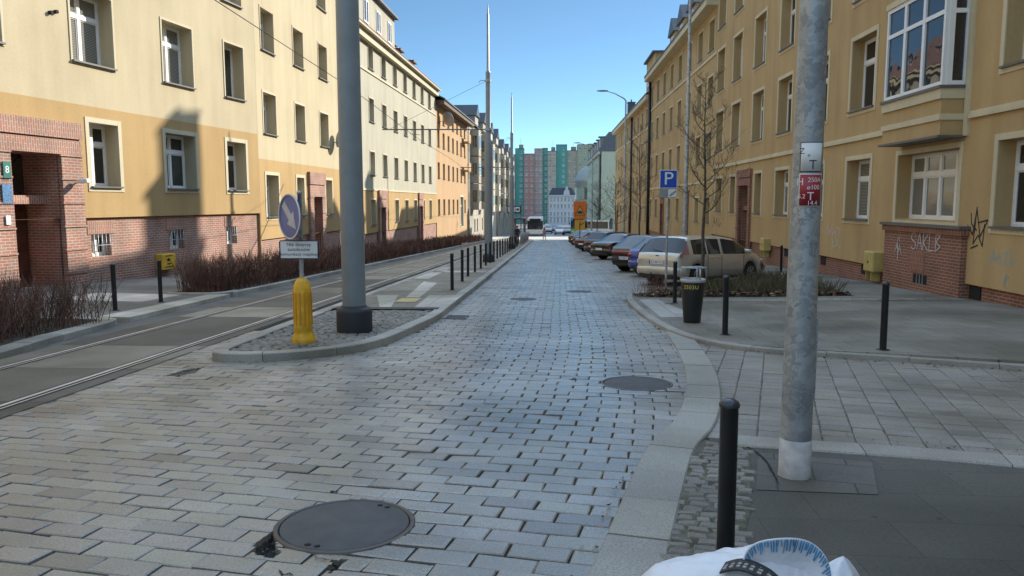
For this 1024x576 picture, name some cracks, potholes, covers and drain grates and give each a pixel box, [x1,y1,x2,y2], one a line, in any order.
crack [748,447,779,484]
manhole cover [601,376,673,392]
manhole cover [273,499,415,555]
pothole [256,536,275,558]
